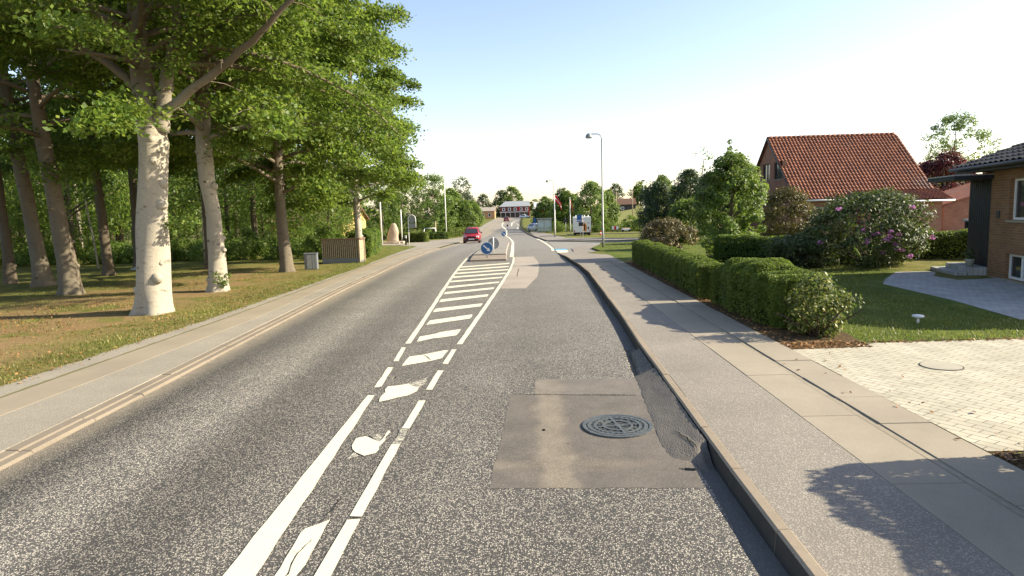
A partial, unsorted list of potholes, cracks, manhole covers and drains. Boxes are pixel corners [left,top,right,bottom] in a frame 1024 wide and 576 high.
manhole cover [918,361,964,371]
crack [286,495,358,576]
manhole cover [583,414,653,439]
